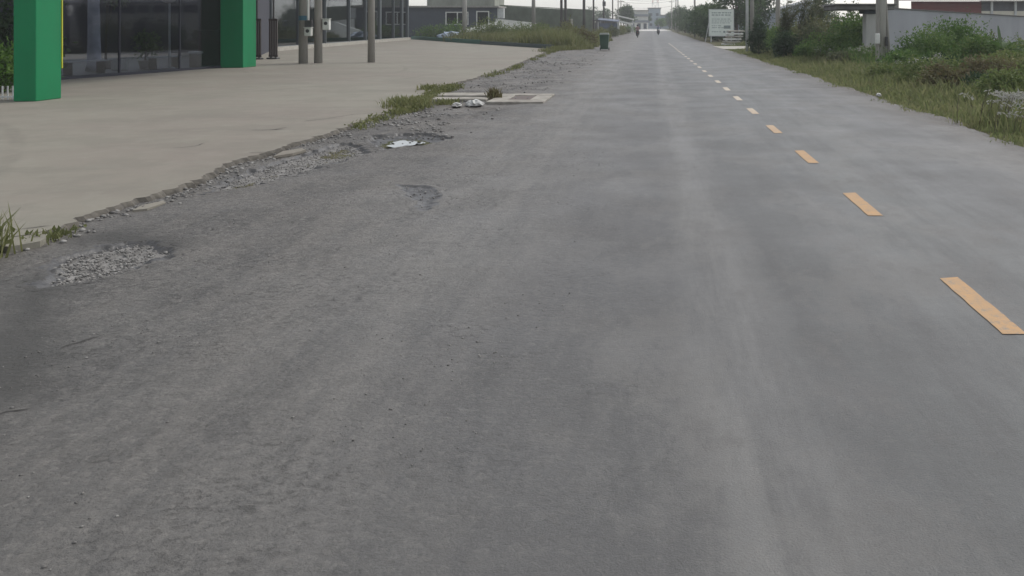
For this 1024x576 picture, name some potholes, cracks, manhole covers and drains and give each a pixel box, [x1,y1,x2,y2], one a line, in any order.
manhole cover [486,94,555,104]
pothole [361,132,459,151]
pothole [385,183,454,215]
pothole [14,238,193,292]
